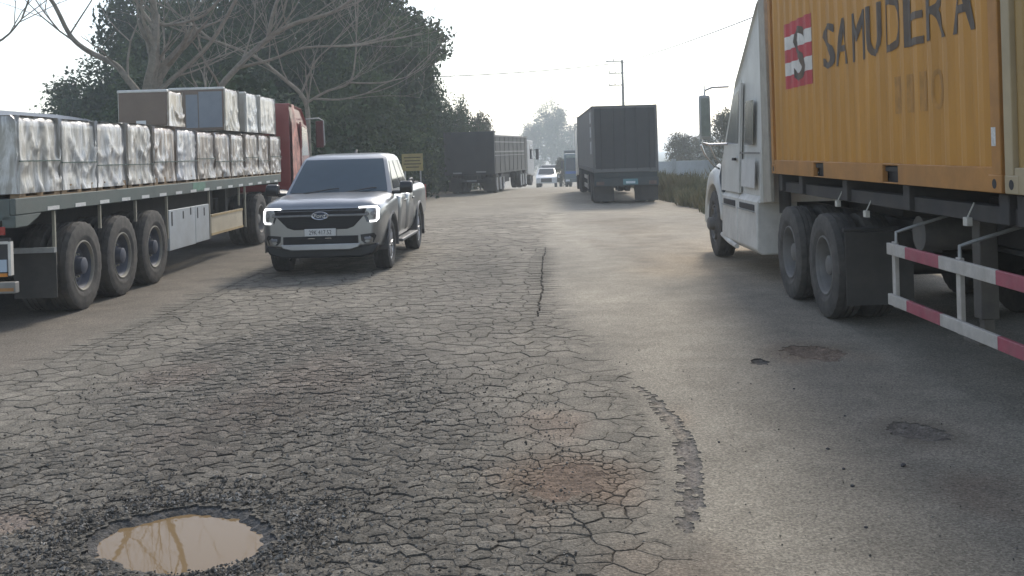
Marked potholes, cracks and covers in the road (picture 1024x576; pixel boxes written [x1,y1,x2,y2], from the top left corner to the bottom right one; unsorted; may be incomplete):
pothole [80,504,277,576]
crack [0,212,707,576]
